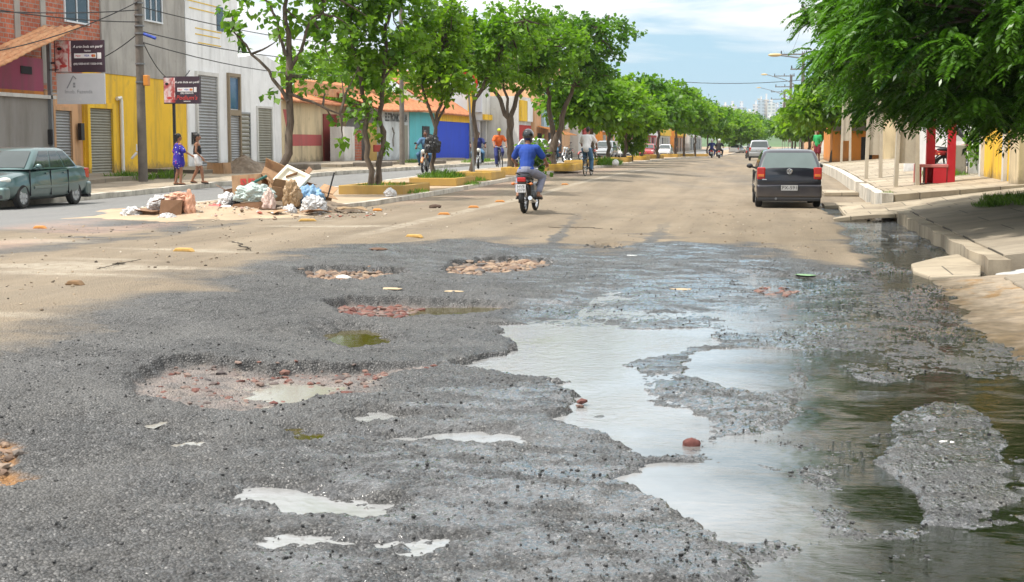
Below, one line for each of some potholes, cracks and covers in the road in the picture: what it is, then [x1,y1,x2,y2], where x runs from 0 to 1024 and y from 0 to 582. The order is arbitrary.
pothole [309,293,524,320]
pothole [814,464,922,535]
pothole [428,254,564,276]
pothole [600,455,848,548]
pothole [672,345,815,393]
crack [97,259,141,269]
pothole [101,352,456,412]
pothole [731,285,809,298]
pothole [534,377,731,464]
pothole [284,263,416,281]
pothole [445,320,727,385]
